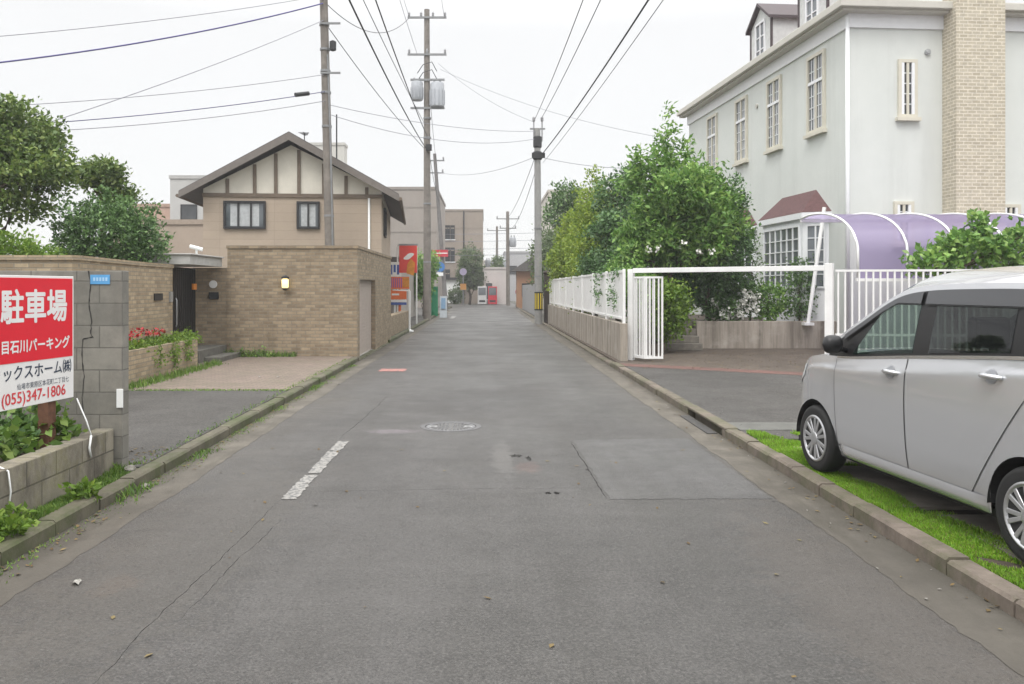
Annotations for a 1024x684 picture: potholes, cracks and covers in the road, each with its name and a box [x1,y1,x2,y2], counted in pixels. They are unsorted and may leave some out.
manhole cover [420,421,481,432]
crack [97,510,274,681]
drain grate [680,405,738,437]
